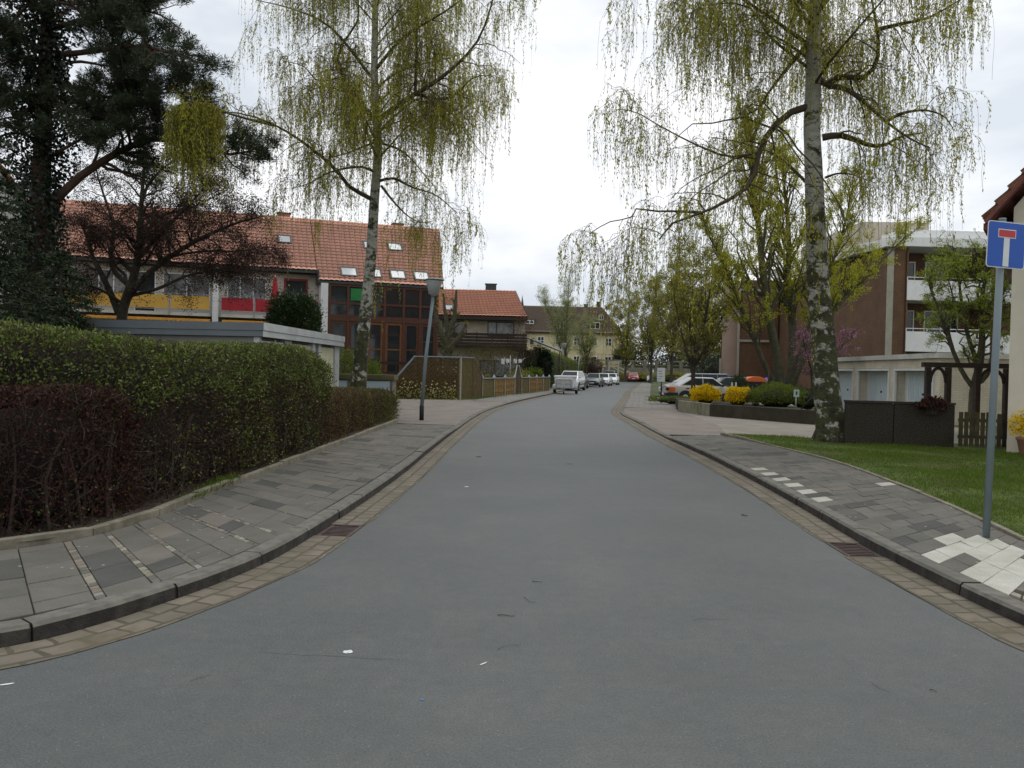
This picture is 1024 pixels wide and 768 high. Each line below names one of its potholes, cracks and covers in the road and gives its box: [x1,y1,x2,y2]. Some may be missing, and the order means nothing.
drain grate [825,542,883,557]
drain grate [316,524,364,537]
